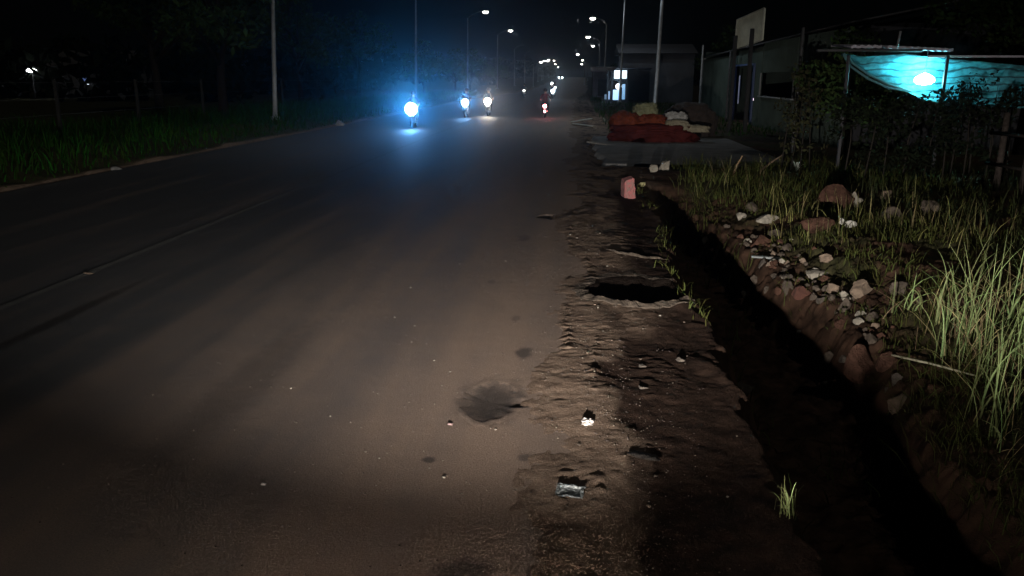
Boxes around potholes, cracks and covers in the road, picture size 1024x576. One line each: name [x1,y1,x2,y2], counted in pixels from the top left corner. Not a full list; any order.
pothole [453,376,538,427]
pothole [570,273,695,309]
